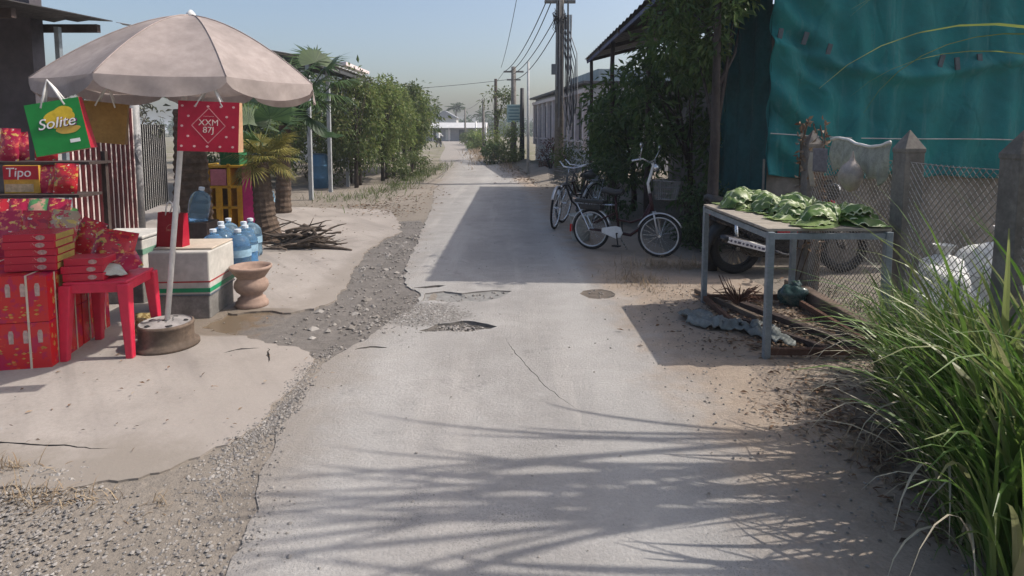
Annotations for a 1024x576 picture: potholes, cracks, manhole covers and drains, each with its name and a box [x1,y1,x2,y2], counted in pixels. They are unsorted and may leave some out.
pothole [420,321,497,332]
pothole [422,290,511,302]
crack [0,441,105,449]
